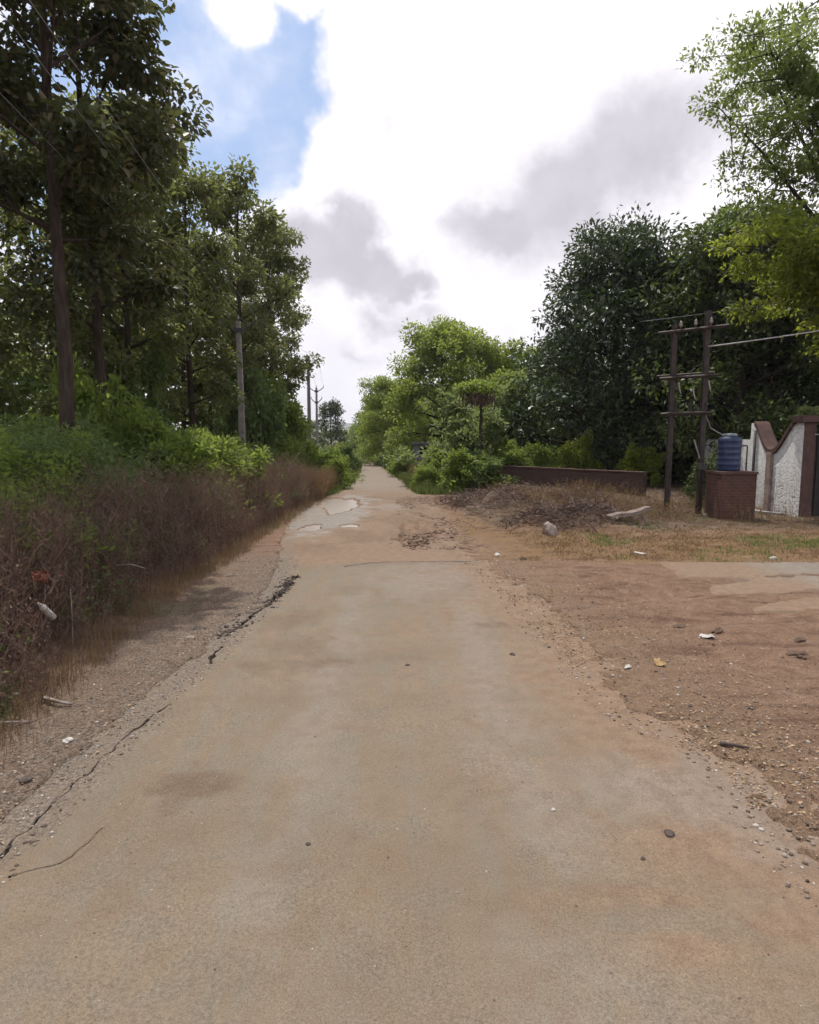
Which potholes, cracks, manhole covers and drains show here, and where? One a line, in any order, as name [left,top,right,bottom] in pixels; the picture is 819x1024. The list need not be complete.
crack [203,575,302,664]
pothole [314,497,366,516]
crack [0,703,175,882]
pothole [293,523,326,532]
